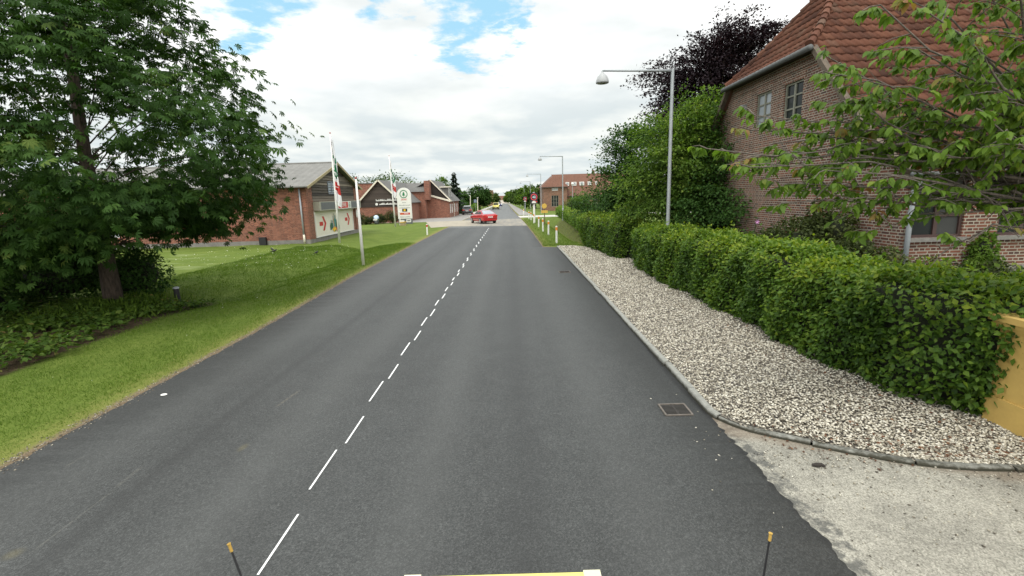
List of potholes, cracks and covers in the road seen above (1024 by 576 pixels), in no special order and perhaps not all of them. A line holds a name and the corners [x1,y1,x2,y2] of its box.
drain grate [657,403,694,416]
